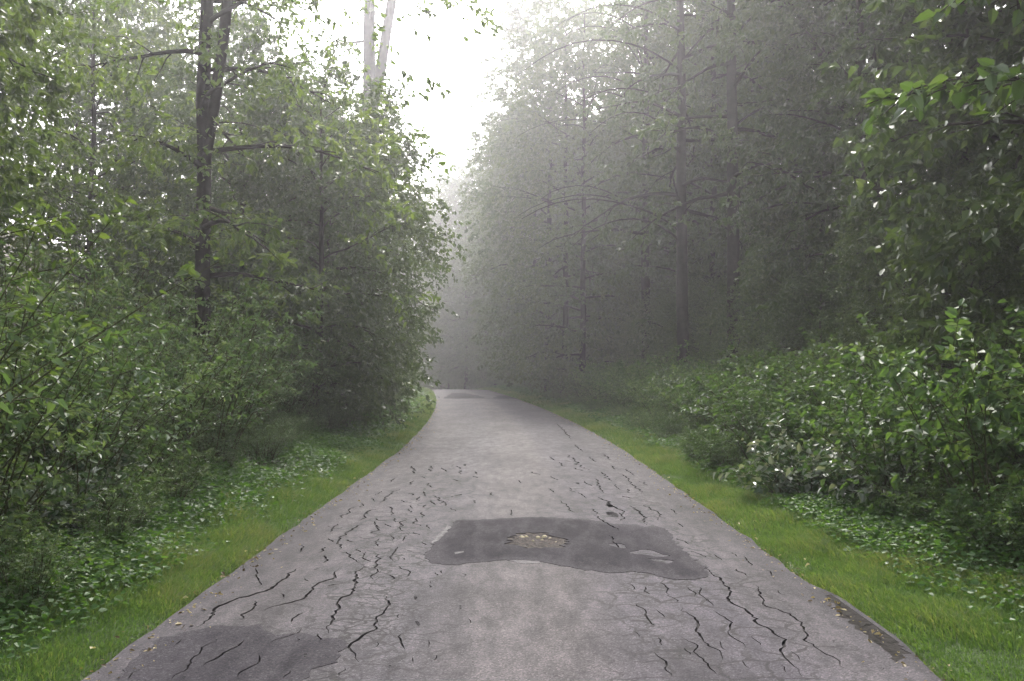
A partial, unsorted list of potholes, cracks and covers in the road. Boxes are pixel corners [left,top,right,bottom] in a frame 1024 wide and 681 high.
pothole [506,532,569,548]
crack [516,424,852,679]
crack [177,465,513,675]
